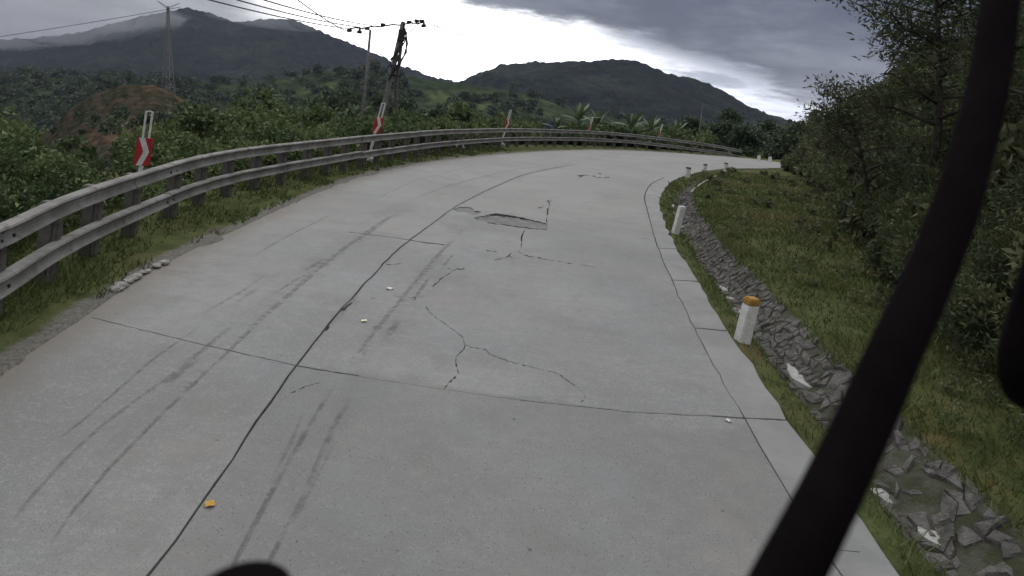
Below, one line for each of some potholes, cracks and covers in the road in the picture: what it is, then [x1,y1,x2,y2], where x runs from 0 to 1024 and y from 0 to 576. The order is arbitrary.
pothole [474,214,547,230]
